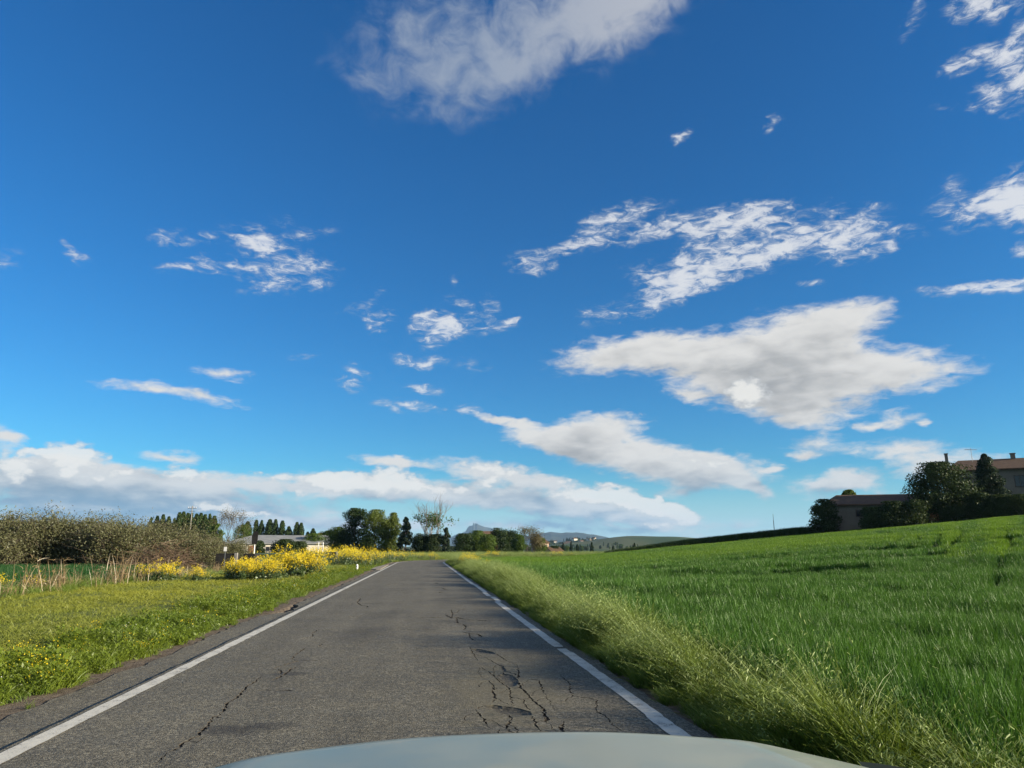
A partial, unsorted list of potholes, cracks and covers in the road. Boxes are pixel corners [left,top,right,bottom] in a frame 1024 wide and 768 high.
pothole [497,674,519,687]
pothole [485,705,532,715]
crack [420,589,619,733]
crack [149,629,323,766]
